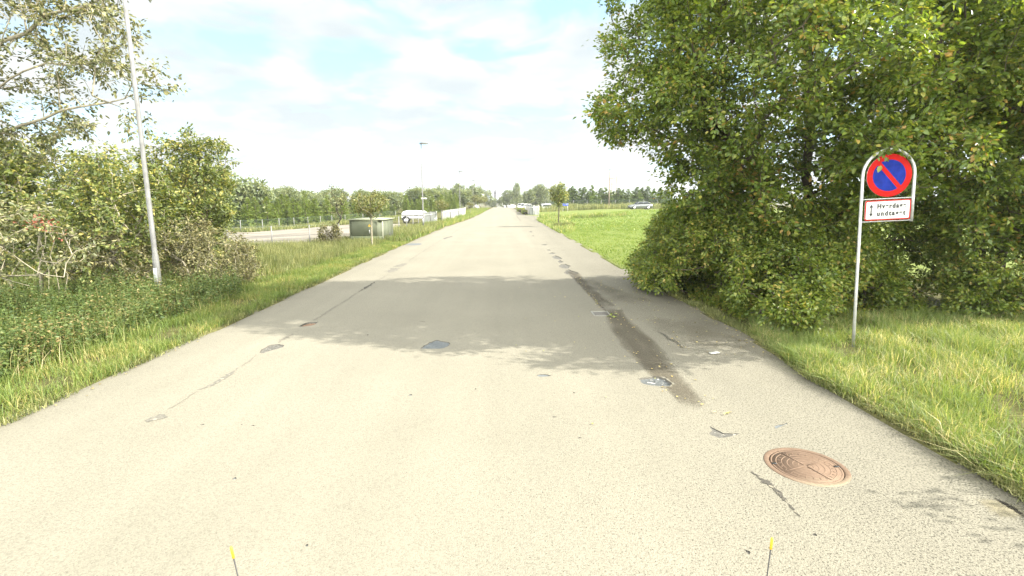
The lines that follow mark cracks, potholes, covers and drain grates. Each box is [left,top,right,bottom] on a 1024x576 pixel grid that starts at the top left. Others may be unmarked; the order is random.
manhole cover [763,448,851,487]
crack [750,470,801,517]
pothole [639,376,672,386]
crack [995,498,1024,517]
